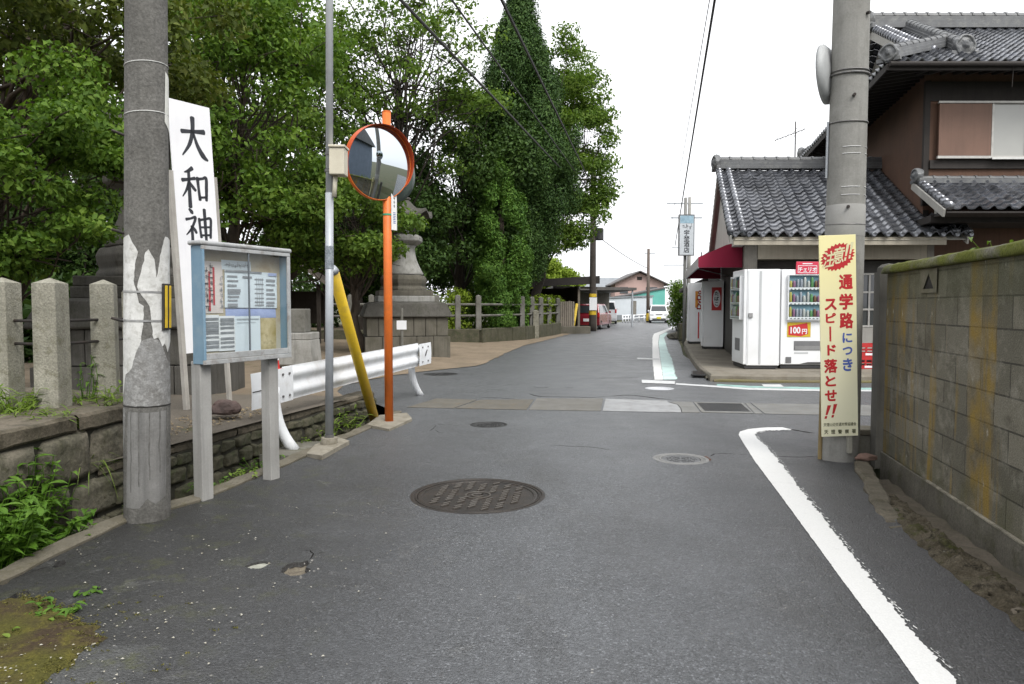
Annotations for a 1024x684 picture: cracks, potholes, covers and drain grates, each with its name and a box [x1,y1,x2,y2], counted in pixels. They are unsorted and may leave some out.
manhole cover [653,453,710,465]
manhole cover [410,478,545,514]
drain grate [694,402,754,414]
pothole [281,559,319,583]
